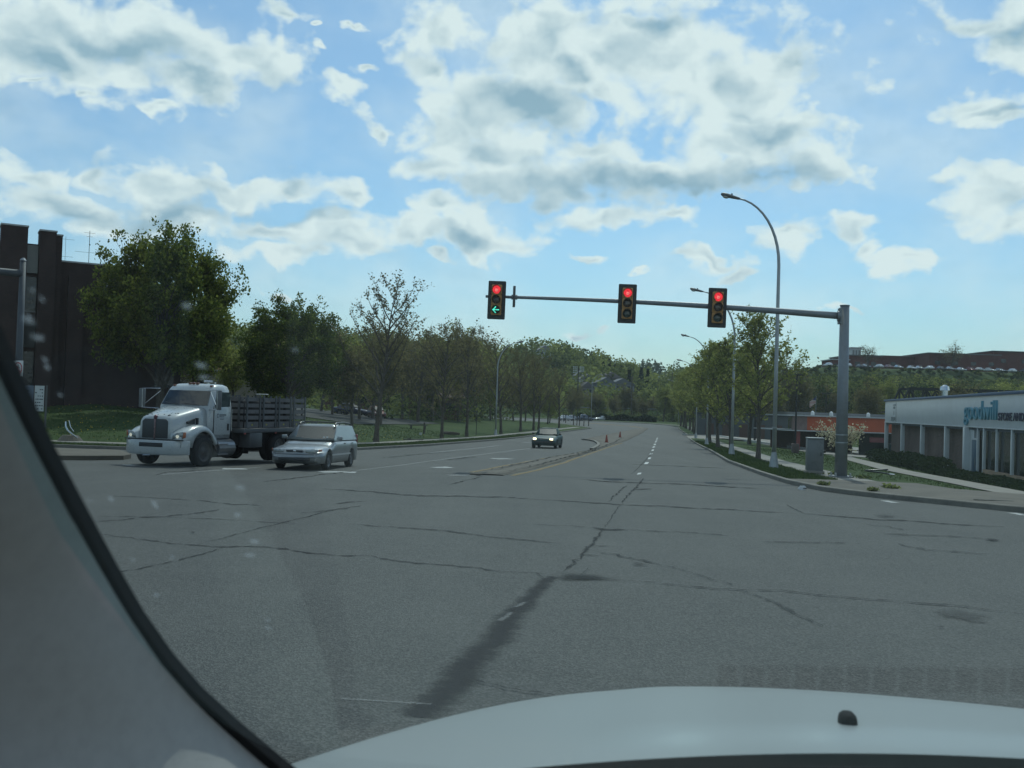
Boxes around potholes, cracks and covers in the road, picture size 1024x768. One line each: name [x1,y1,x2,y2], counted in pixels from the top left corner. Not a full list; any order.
crack [105,470,1021,625]
